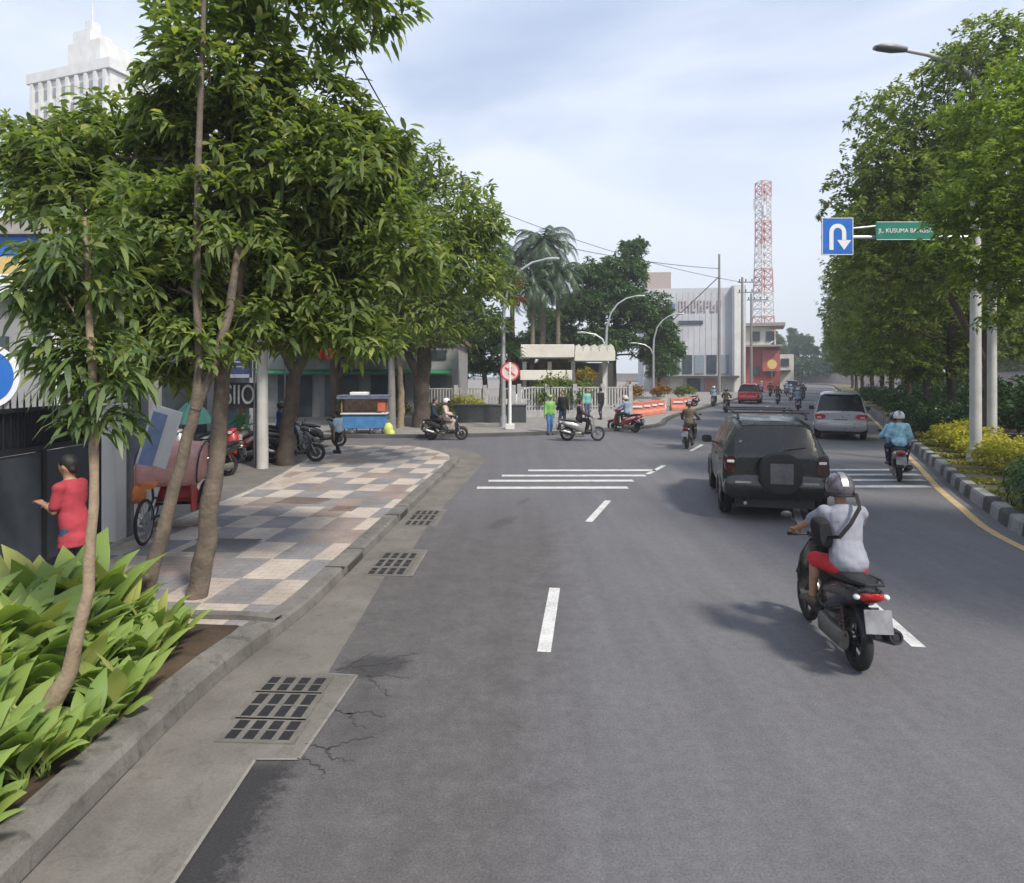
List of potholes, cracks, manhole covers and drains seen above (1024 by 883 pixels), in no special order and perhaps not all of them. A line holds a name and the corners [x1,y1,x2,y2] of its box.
drain grate [401,510,442,526]
drain grate [363,552,421,576]
drain grate [214,675,334,745]
crack [302,650,421,778]
